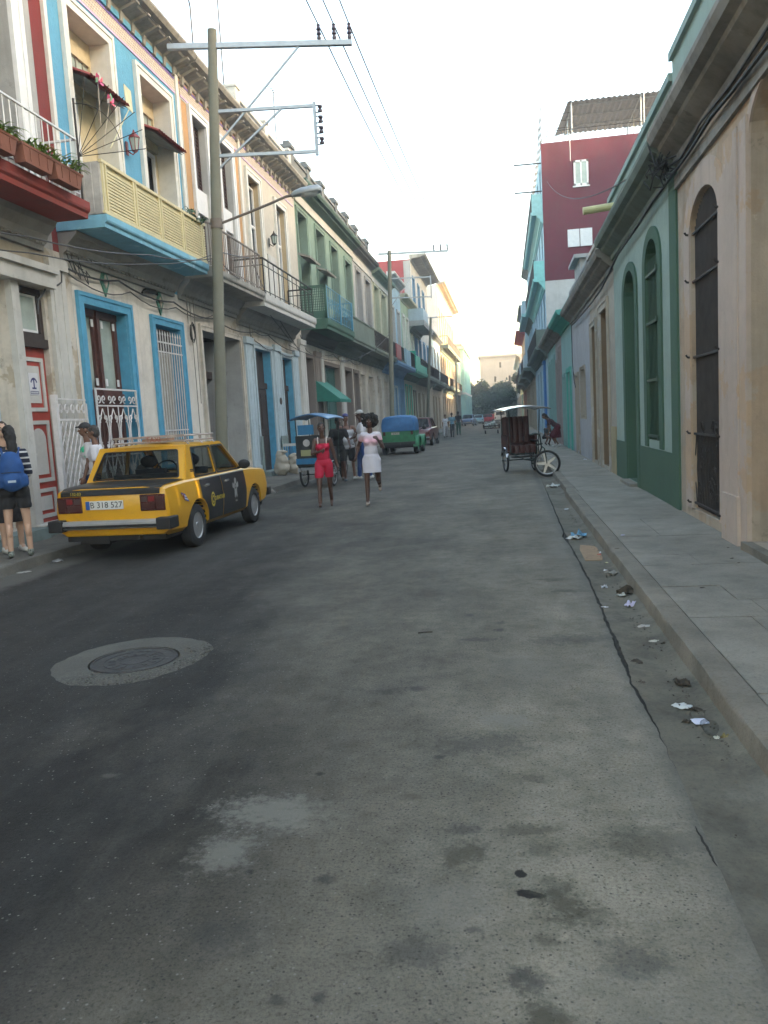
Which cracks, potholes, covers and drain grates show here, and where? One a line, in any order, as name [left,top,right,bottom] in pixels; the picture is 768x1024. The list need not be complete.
manhole cover [50,637,214,686]
crack [543,484,675,766]
